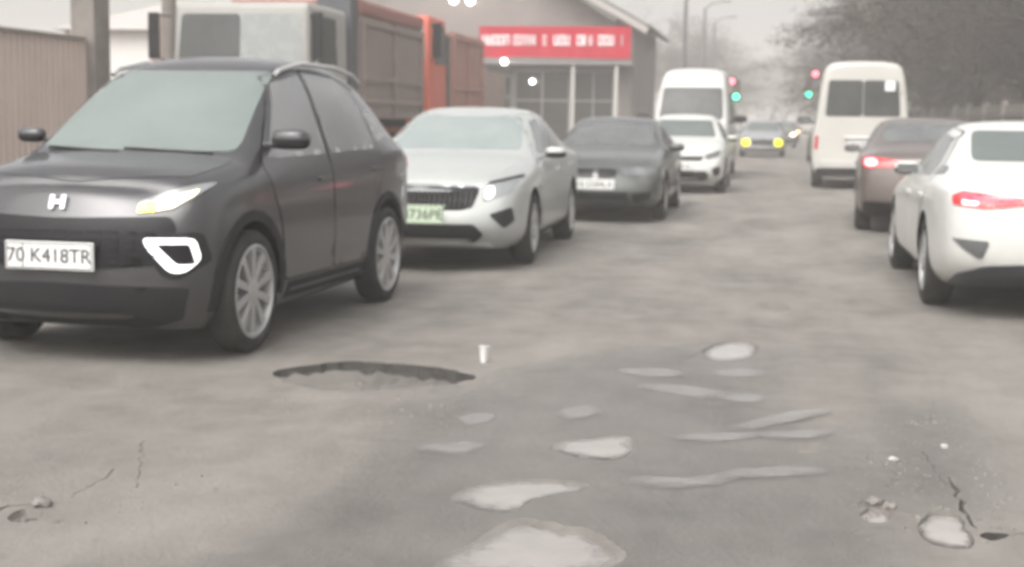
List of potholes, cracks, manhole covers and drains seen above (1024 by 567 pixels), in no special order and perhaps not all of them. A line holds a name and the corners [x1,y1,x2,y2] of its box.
pothole [273,361,476,392]
pothole [860,508,893,523]
pothole [434,518,626,567]
pothole [449,479,590,512]
crack [905,441,978,529]
pothole [702,341,759,361]
pothole [549,435,637,459]
pothole [917,513,975,549]
pothole [7,508,46,523]
